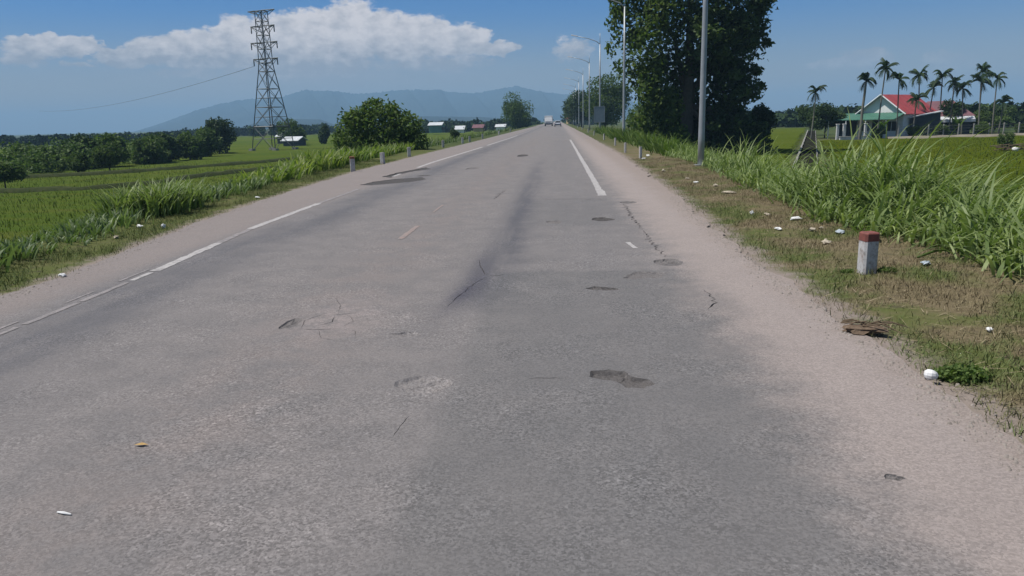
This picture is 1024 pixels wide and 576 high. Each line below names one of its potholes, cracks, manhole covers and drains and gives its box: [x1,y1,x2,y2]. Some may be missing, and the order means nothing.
pothole [589,369,655,388]
crack [623,204,666,256]
crack [302,301,357,341]
